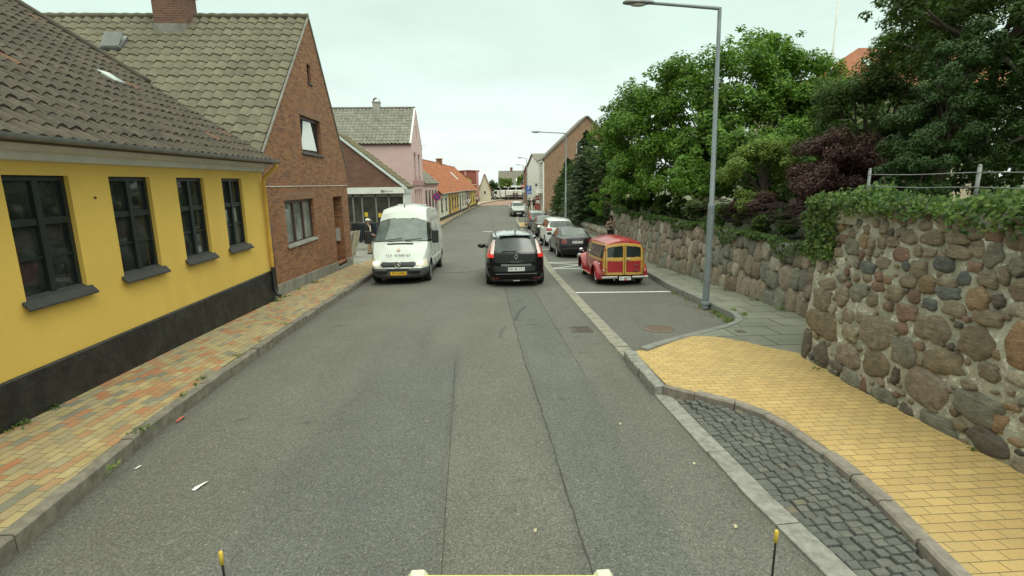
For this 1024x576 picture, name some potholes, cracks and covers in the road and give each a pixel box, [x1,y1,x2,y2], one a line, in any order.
manhole cover [643,325,675,333]
